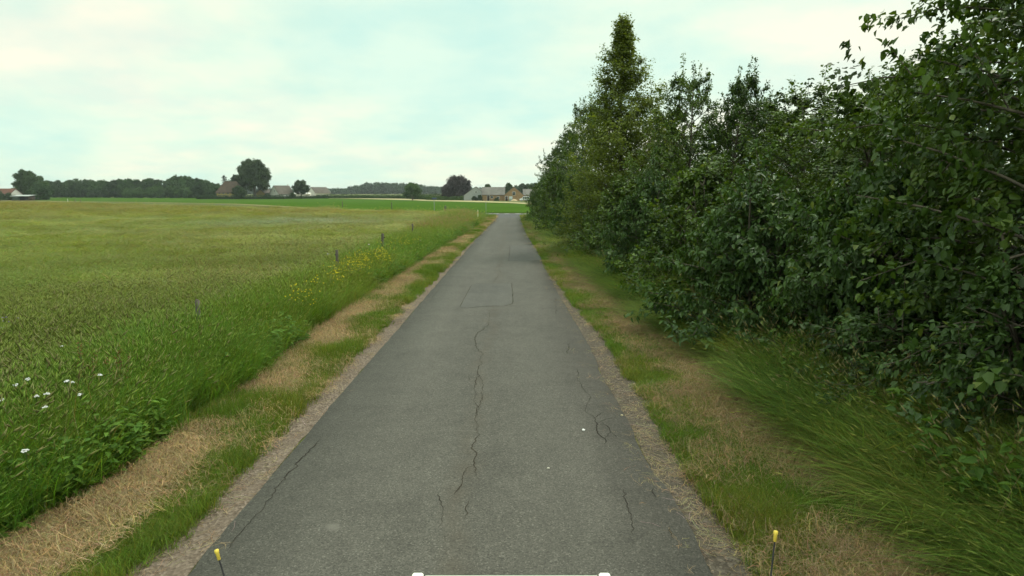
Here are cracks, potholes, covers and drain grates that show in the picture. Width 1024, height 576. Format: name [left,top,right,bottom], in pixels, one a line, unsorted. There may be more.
crack [228,441,318,550]
crack [437,310,490,541]
crack [577,371,617,446]
